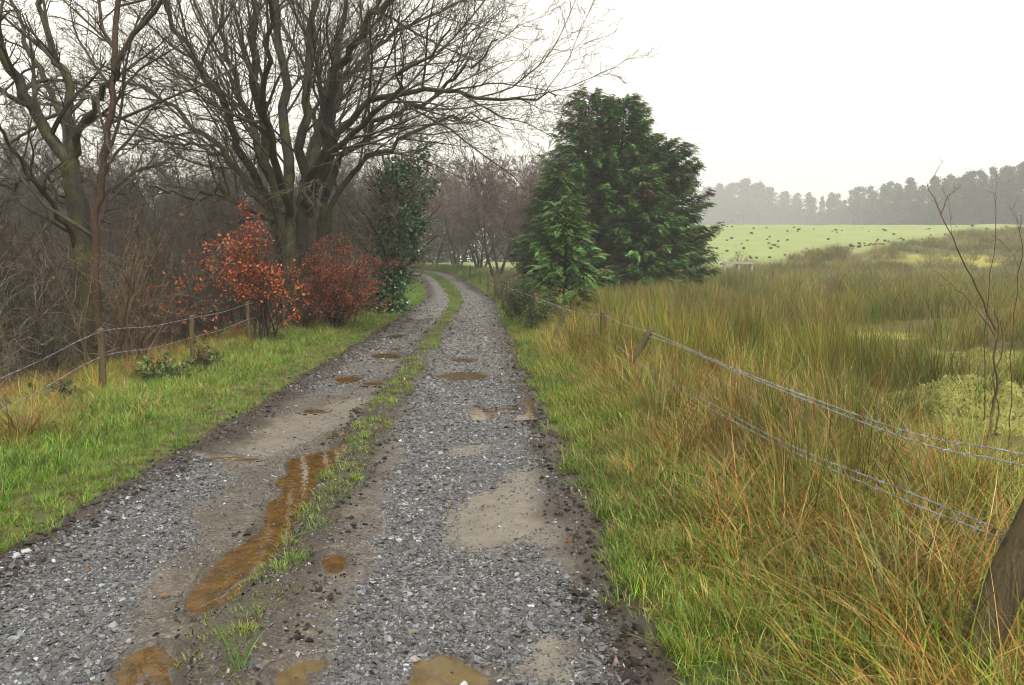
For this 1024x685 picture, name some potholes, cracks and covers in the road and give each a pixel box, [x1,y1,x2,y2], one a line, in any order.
pothole [432,371,494,382]
pothole [462,404,528,422]
pothole [367,351,410,360]
pothole [103,638,199,685]
pothole [175,435,354,624]
pothole [328,374,369,384]
pothole [399,648,512,685]
pothole [295,407,331,415]
